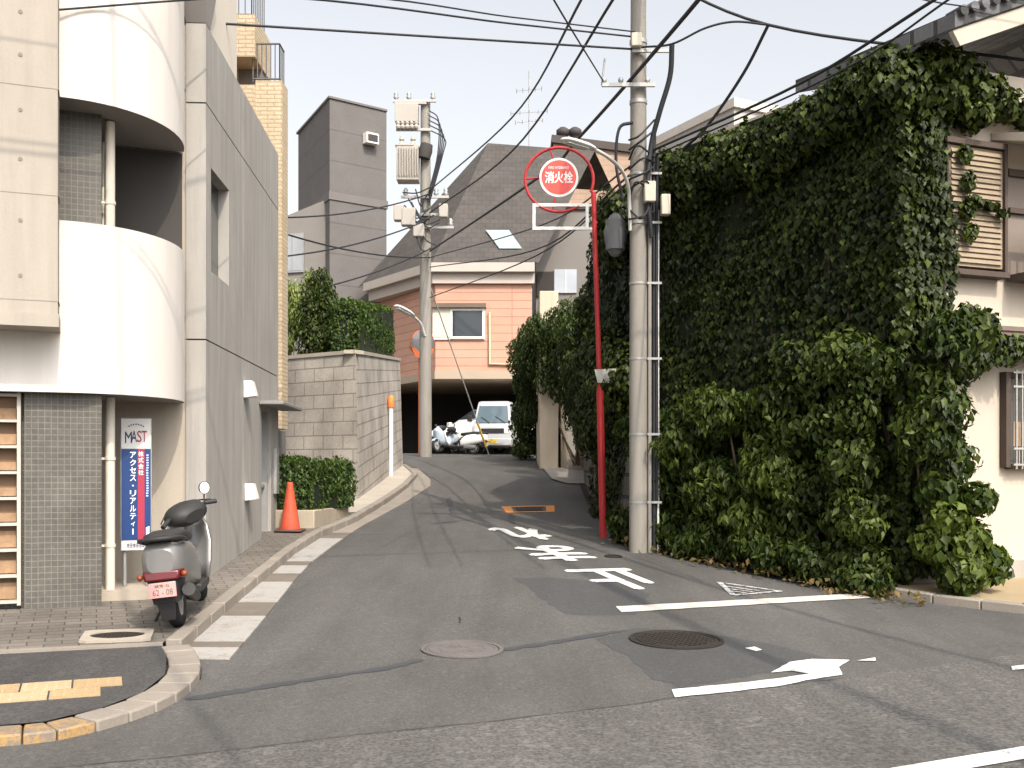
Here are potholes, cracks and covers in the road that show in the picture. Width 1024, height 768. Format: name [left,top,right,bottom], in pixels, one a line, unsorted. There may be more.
manhole cover [629,630,724,650]
manhole cover [79,628,154,644]
manhole cover [421,640,504,659]
